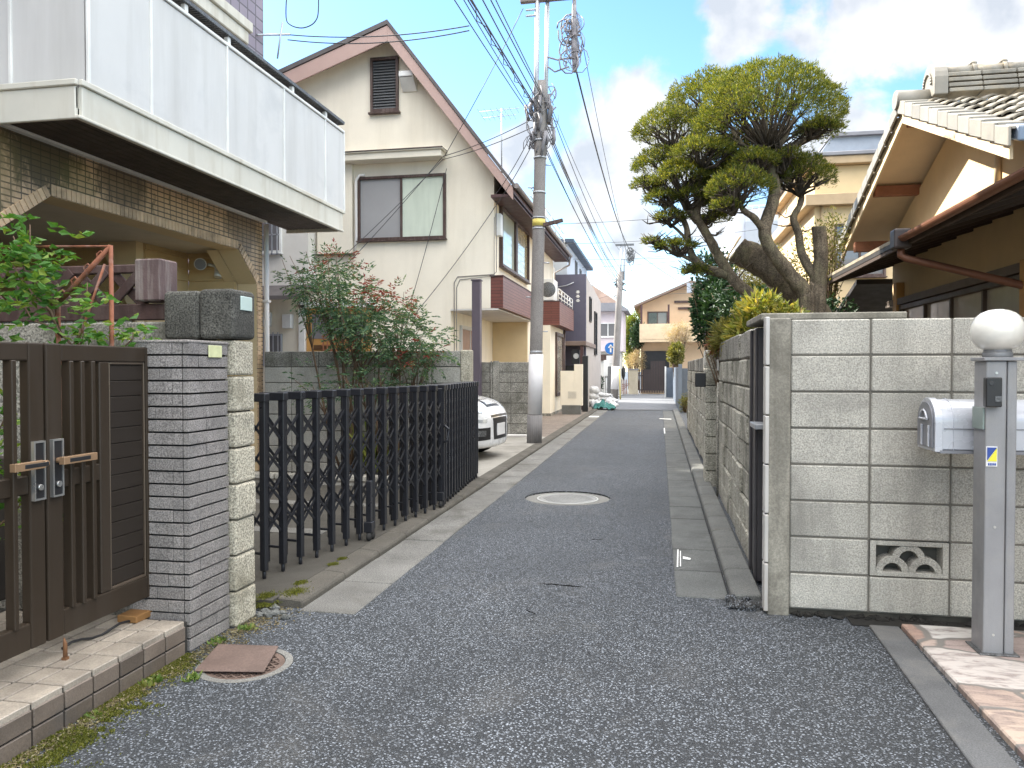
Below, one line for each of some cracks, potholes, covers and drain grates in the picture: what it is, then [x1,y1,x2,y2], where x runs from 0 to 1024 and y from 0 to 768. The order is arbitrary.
manhole cover [195,649,293,683]
manhole cover [525,492,610,505]
